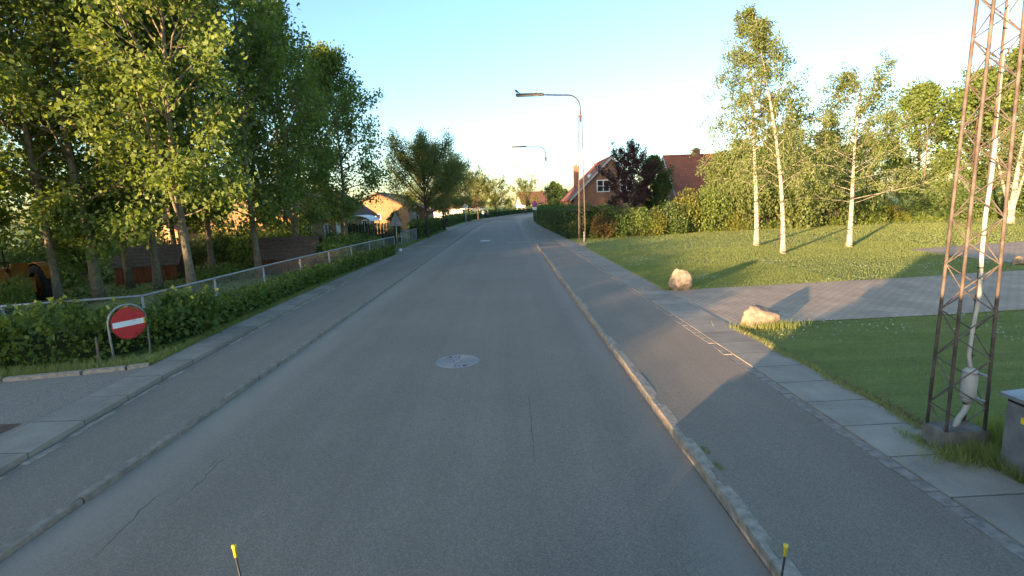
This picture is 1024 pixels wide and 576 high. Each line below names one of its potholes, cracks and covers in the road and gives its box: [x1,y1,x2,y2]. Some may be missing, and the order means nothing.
crack [94,452,233,558]
manhole cover [434,354,480,369]
